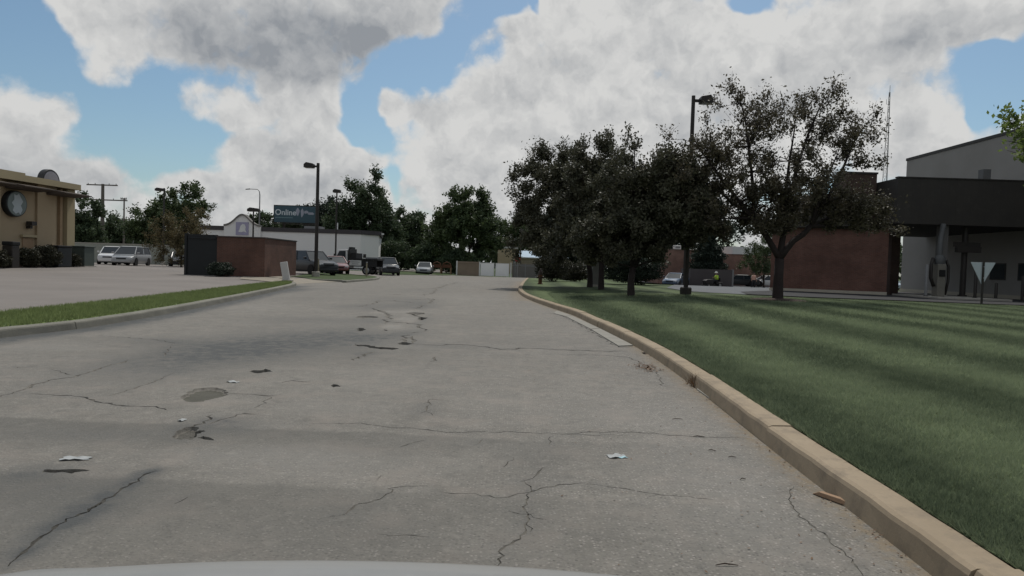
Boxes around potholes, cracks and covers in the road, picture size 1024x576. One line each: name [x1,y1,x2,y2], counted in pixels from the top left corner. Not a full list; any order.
pothole [172,427,205,440]
crack [330,476,414,517]
crack [444,458,713,566]
crack [8,470,188,566]
crack [358,282,640,363]
pothole [181,387,228,402]
crack [308,399,738,447]
crack [0,336,174,410]
